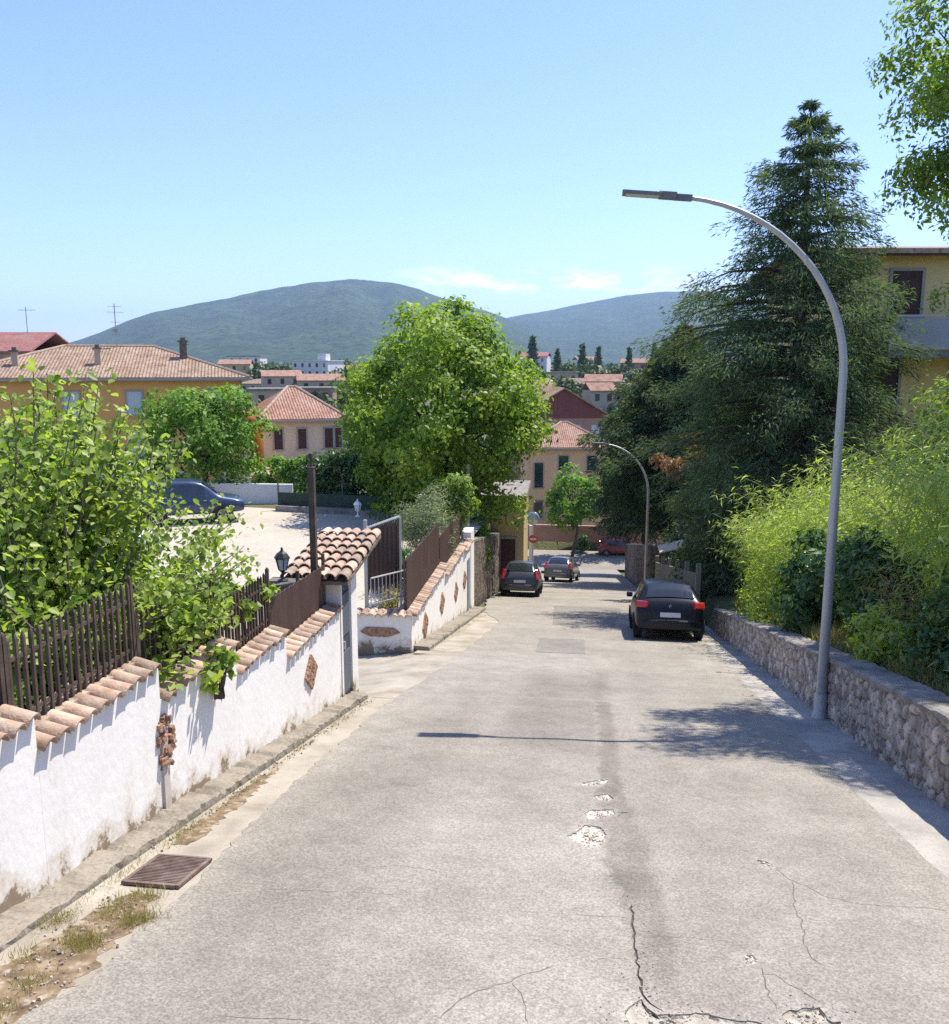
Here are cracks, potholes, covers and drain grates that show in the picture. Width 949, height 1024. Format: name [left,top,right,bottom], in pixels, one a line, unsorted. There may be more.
pothole [584,809,615,819]
crack [440,966,552,1023]
pothole [782,1007,841,1024]
pothole [568,825,607,846]
pothole [624,999,762,1024]
drain grate [121,854,212,889]
crack [762,871,938,1009]
